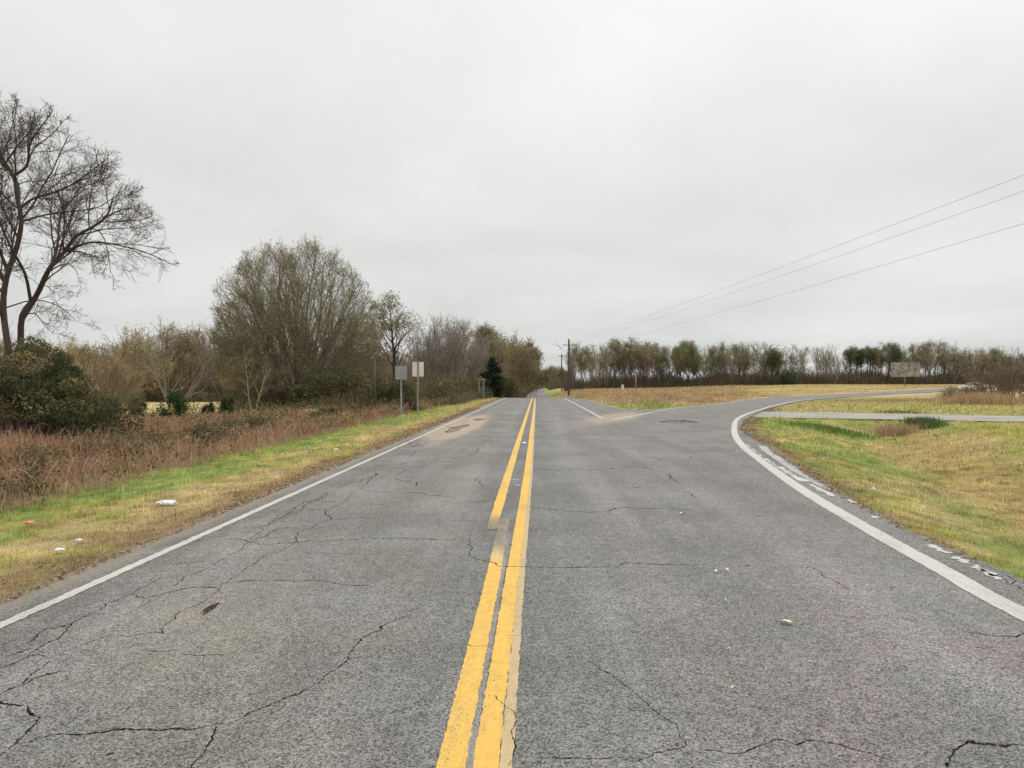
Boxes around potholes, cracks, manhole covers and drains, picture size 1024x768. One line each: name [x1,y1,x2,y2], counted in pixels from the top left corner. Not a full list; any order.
crack [945,740,1024,768]
crack [0,440,699,768]
crack [535,655,895,767]
